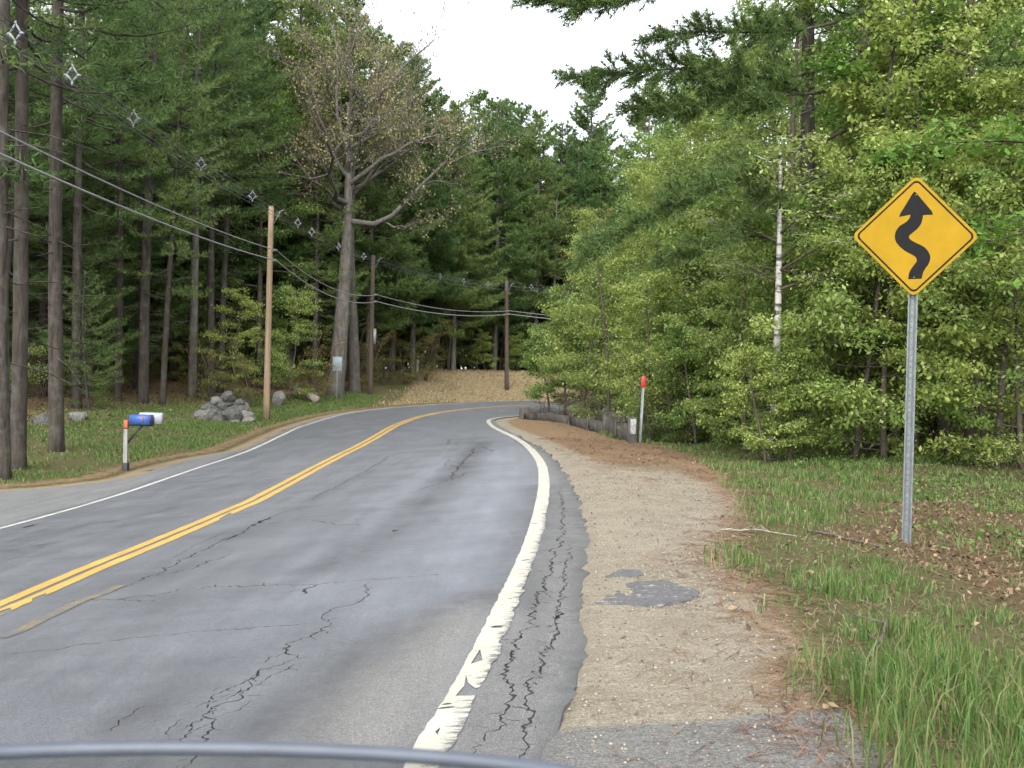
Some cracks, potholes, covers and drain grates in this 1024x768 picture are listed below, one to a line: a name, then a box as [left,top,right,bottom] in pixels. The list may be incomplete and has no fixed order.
crack [12,574,443,768]
crack [418,438,492,490]
crack [472,492,573,758]
